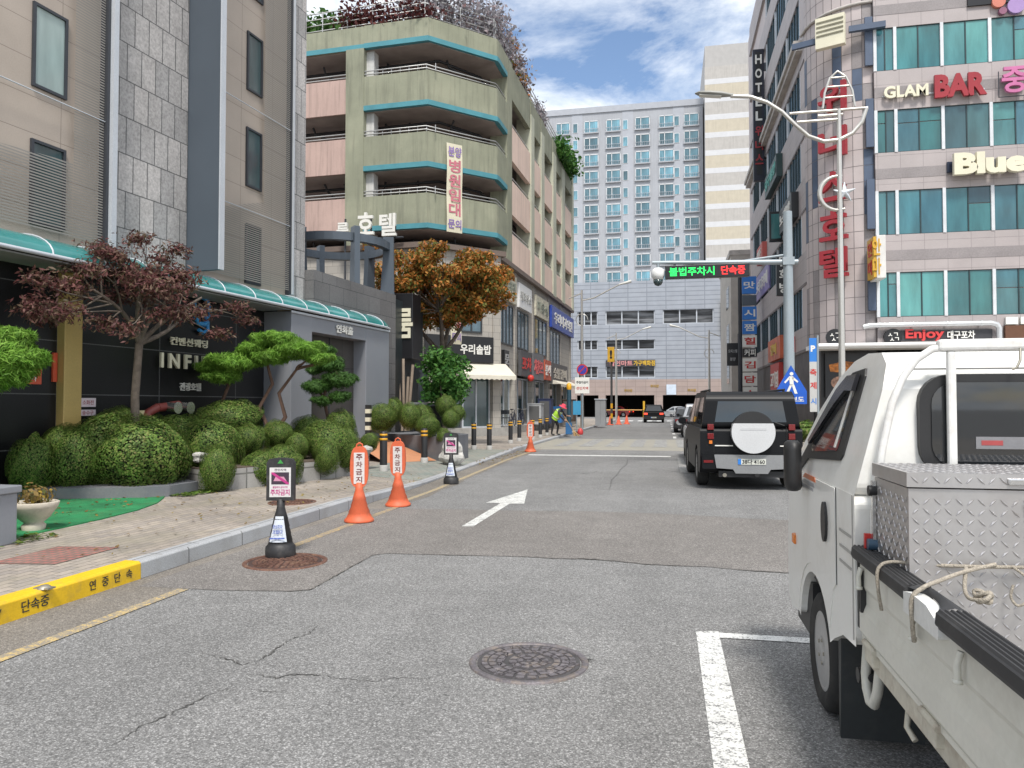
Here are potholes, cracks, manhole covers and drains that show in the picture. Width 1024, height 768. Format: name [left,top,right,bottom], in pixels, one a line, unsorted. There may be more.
crack [112,625,457,745]
manhole cover [469,642,589,685]
manhole cover [242,553,328,571]
